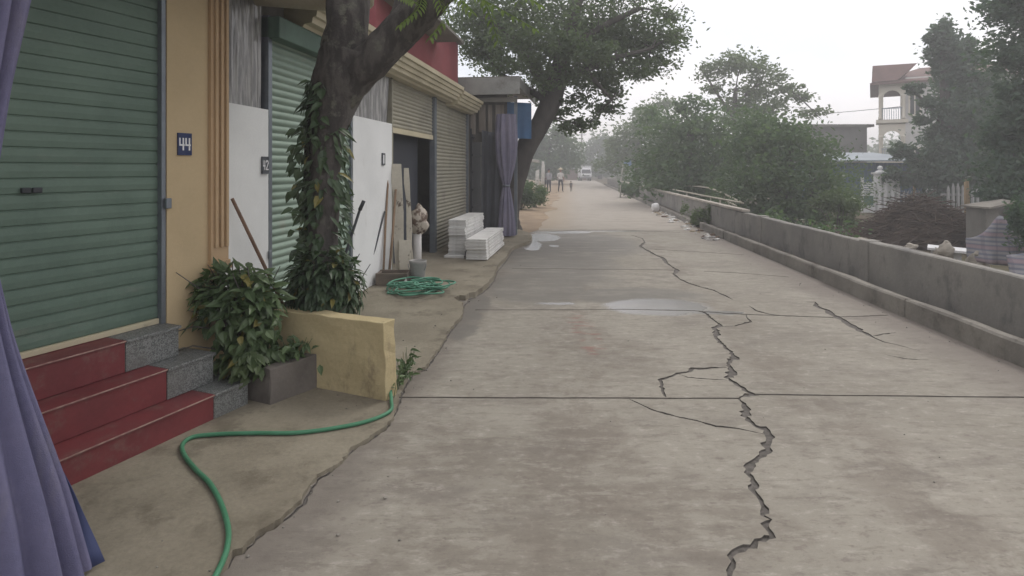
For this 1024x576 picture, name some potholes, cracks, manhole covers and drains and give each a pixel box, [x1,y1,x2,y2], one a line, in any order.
crack [228,250,514,569]
crack [813,302,920,360]
crack [630,235,789,576]
